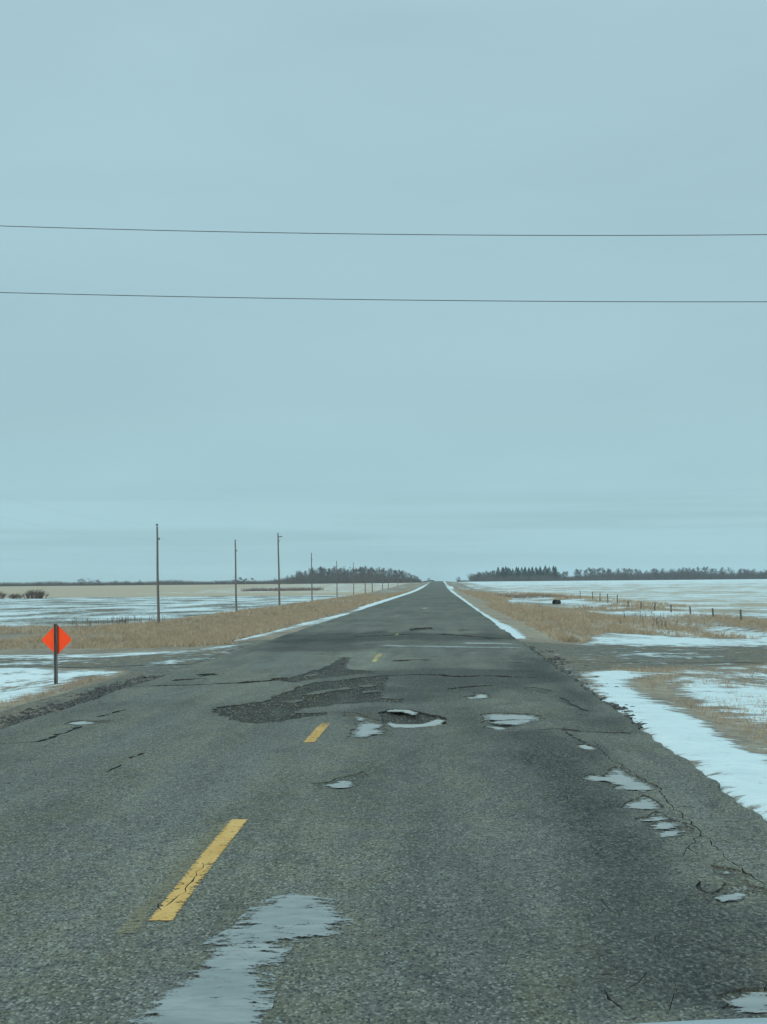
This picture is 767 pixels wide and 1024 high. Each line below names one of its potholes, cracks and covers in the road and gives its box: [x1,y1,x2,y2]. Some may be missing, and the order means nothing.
crack [8,709,127,744]
pothole [708,865,767,903]
